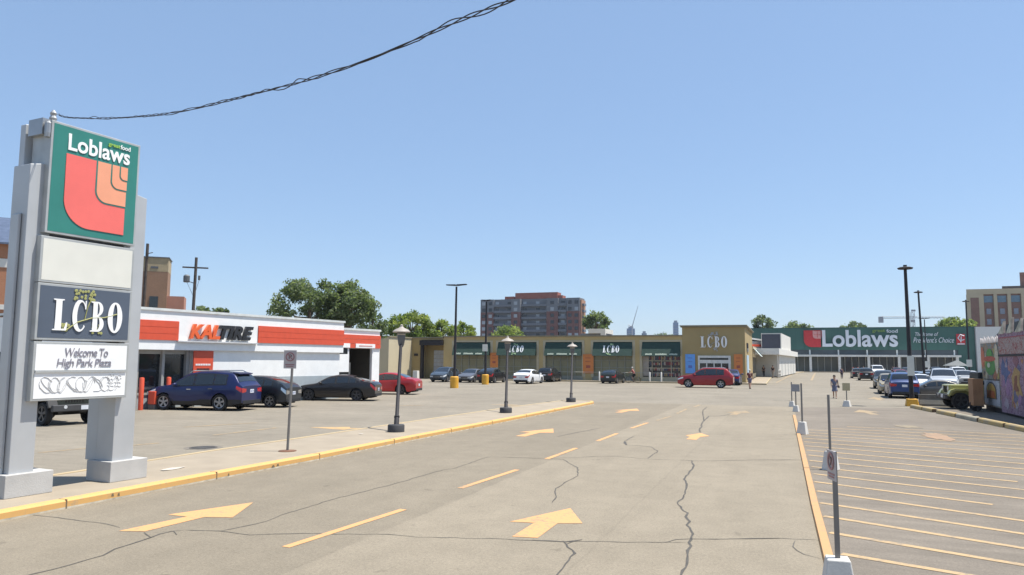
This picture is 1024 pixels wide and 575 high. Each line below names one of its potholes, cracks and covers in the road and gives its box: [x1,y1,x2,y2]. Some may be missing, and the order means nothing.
crack [29,437,814,575]
